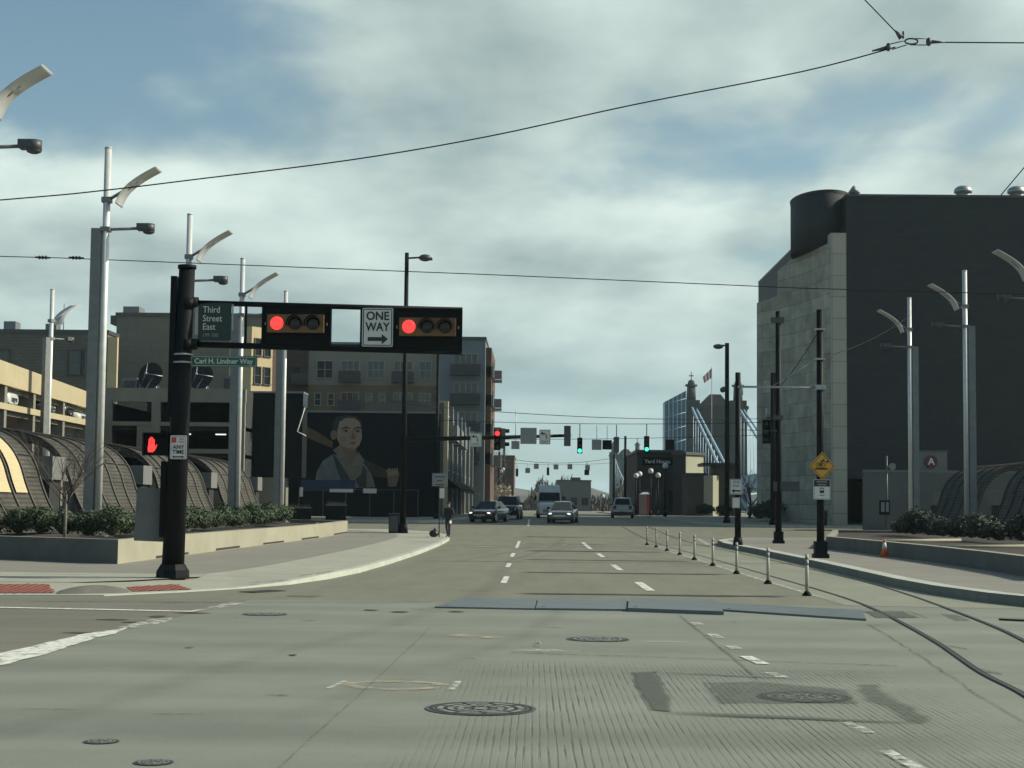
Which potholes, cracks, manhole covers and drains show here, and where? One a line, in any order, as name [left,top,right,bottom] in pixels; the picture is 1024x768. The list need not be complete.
manhole cover [425,702,536,716]
manhole cover [758,691,852,703]
